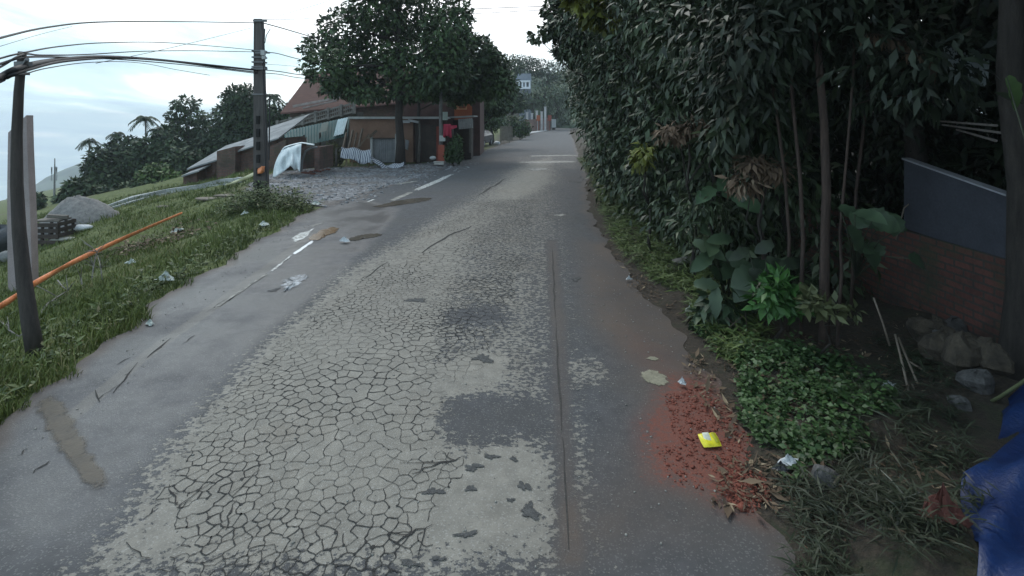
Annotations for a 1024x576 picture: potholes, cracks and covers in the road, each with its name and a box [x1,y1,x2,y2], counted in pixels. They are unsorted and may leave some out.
crack [95,335,195,402]
crack [145,179,536,576]
pothole [521,500,541,520]
